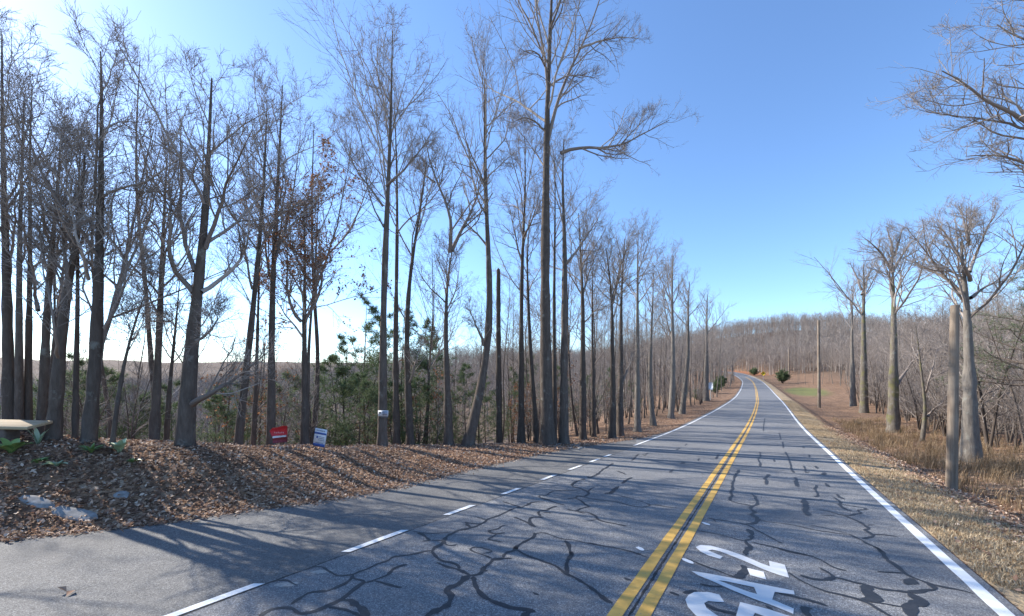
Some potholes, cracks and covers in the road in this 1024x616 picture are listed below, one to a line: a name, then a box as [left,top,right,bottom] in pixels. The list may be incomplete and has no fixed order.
crack [414,453,674,616]
crack [702,418,971,616]
crack [351,564,407,588]
crack [327,606,361,616]
